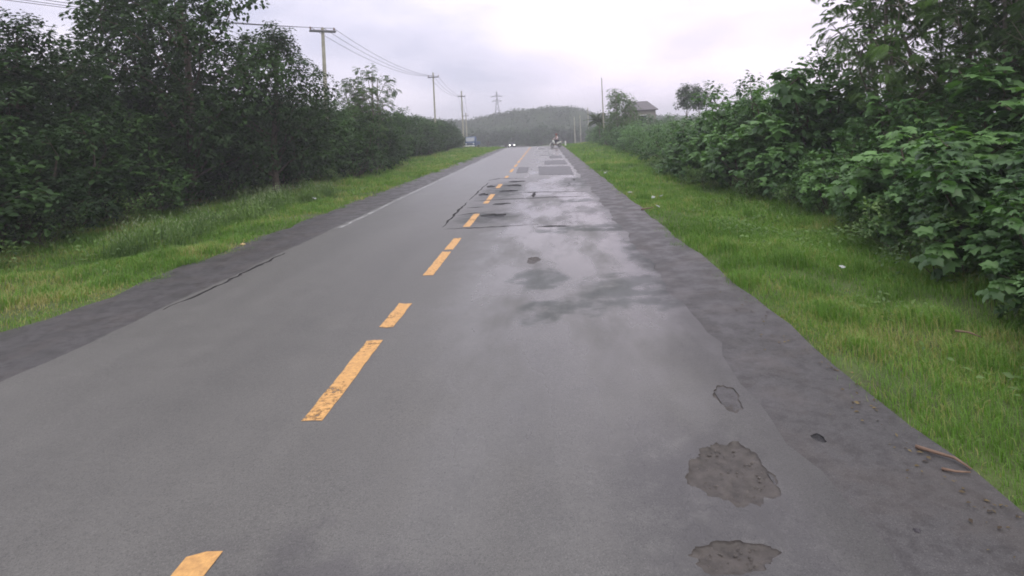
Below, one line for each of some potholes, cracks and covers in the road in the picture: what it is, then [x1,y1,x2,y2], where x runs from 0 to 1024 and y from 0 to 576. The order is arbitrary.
pothole [689,540,782,576]
crack [163,253,285,310]
pothole [685,441,781,508]
pothole [713,385,743,413]
